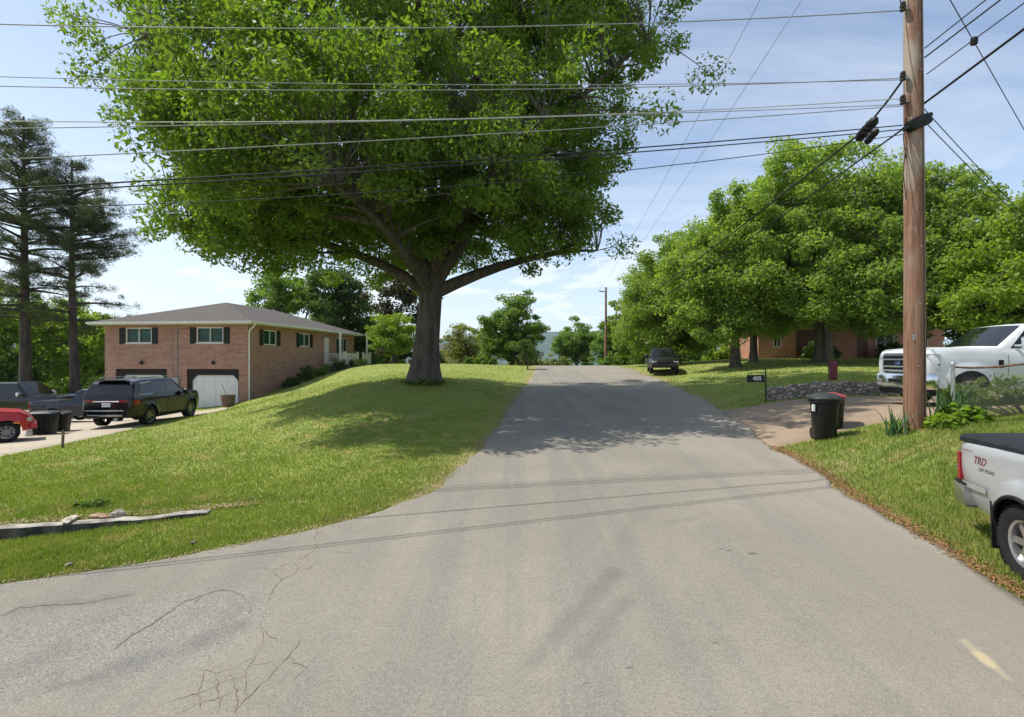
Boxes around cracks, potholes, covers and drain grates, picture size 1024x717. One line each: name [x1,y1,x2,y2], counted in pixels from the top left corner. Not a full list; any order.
crack [252,528,321,603]
crack [112,589,305,713]
crack [5,595,129,614]
